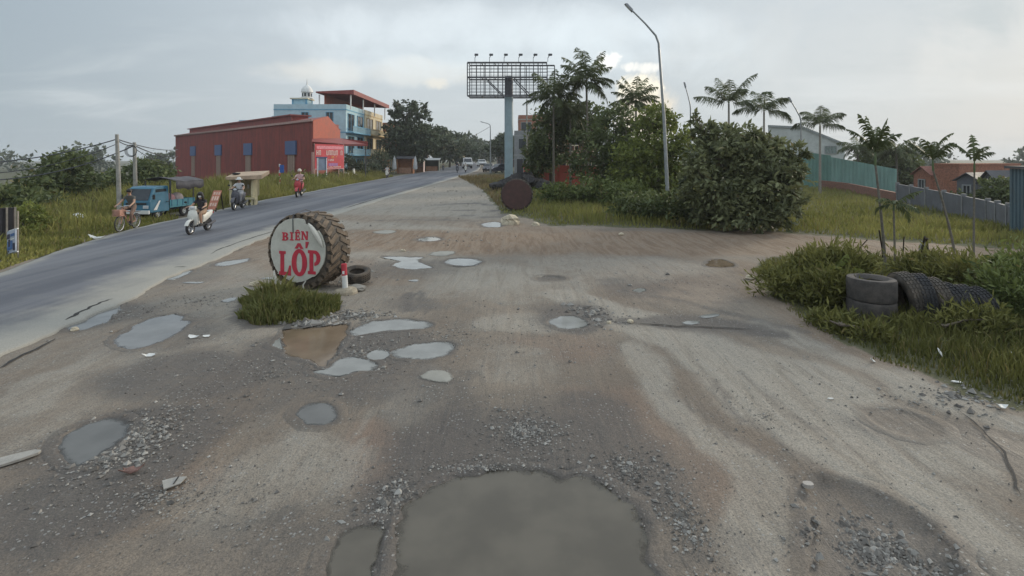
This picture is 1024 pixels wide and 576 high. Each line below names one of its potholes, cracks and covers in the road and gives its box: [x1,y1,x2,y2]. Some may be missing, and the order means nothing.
pothole [420,370,453,382]
pothole [283,397,348,432]
pothole [701,258,740,268]
pothole [386,339,464,363]
pothole [374,457,677,576]
crack [0,339,54,368]
pothole [41,412,144,475]
pothole [271,321,354,369]
pothole [439,257,487,267]
crack [957,409,1021,494]
pothole [349,316,440,337]
